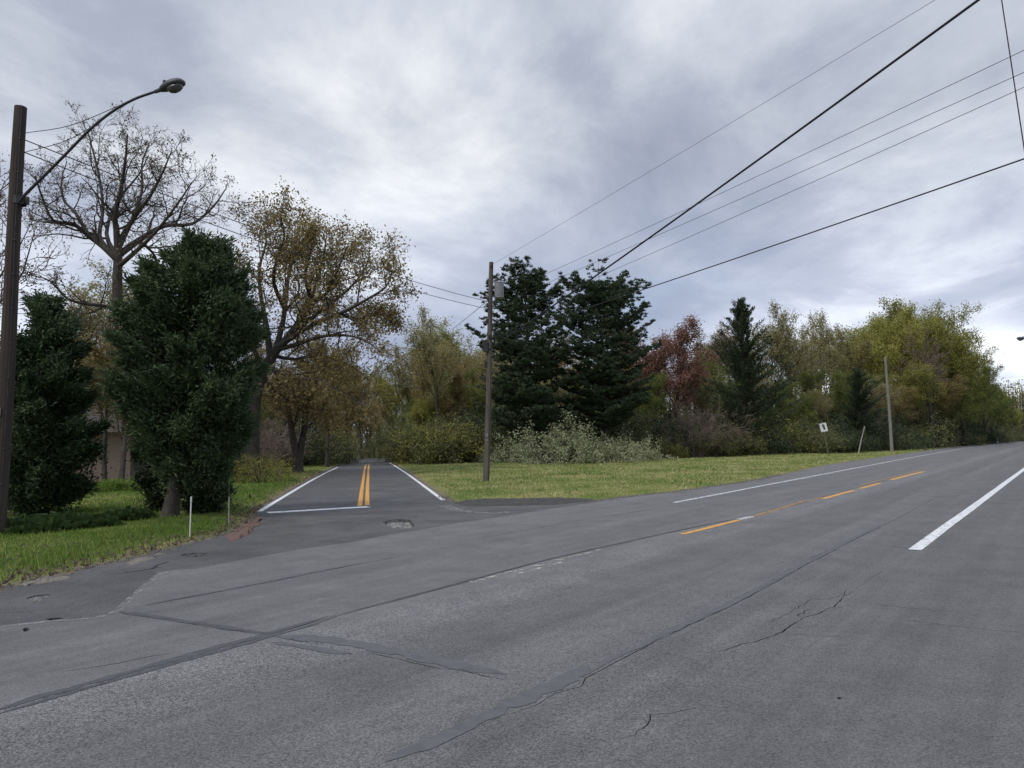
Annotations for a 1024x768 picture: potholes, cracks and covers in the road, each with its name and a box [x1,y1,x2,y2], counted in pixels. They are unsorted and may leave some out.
crack [716,572,881,652]
pothole [384,519,415,529]
pothole [27,594,50,603]
